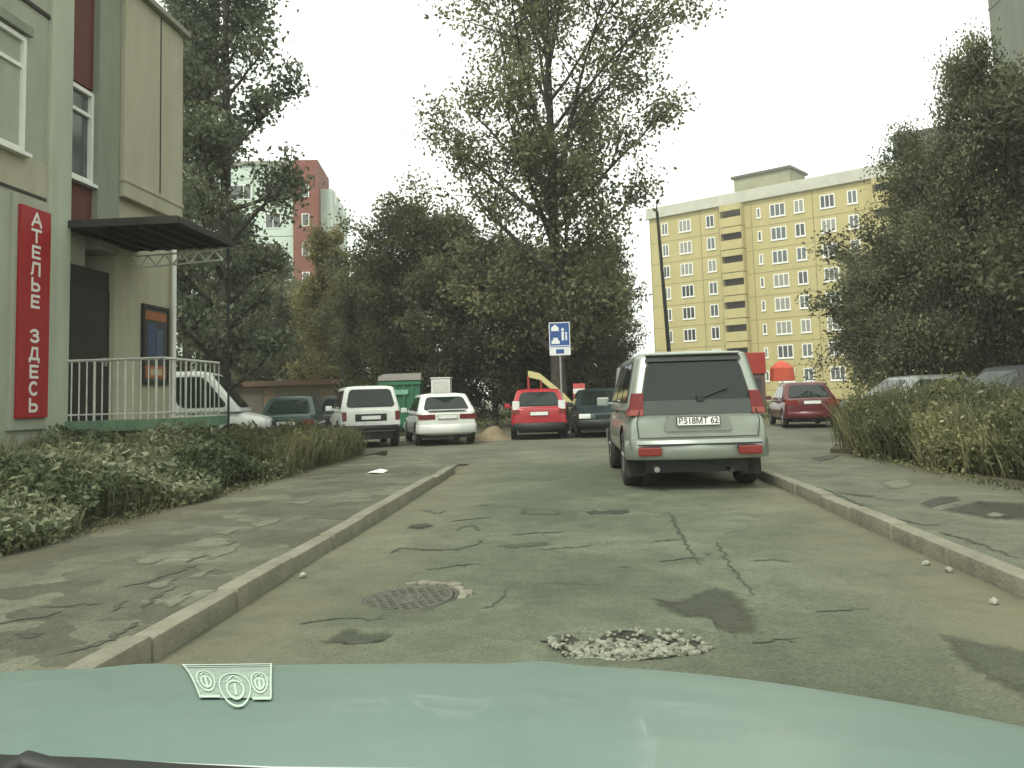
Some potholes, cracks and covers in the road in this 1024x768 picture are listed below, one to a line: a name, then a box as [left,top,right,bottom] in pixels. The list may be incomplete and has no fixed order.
crack [657,511,795,595]
manhole cover [359,580,473,612]
crack [300,614,386,624]
pothole [539,627,714,661]
crack [392,504,495,569]
crack [513,531,591,549]
